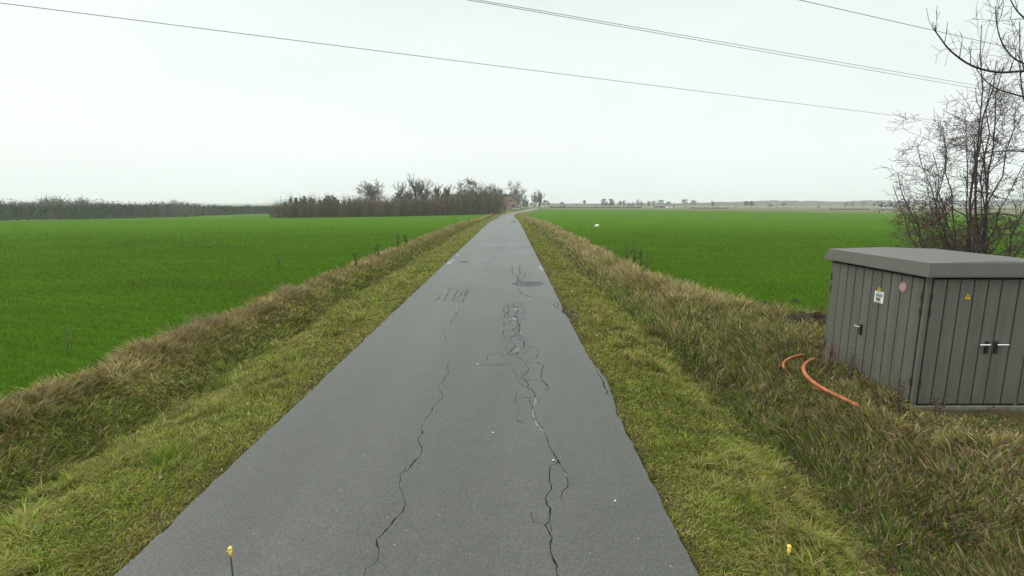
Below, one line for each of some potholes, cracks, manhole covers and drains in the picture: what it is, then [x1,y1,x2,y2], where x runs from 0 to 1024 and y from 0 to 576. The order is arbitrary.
crack [364,361,450,576]
crack [436,288,469,339]
crack [486,290,568,576]
